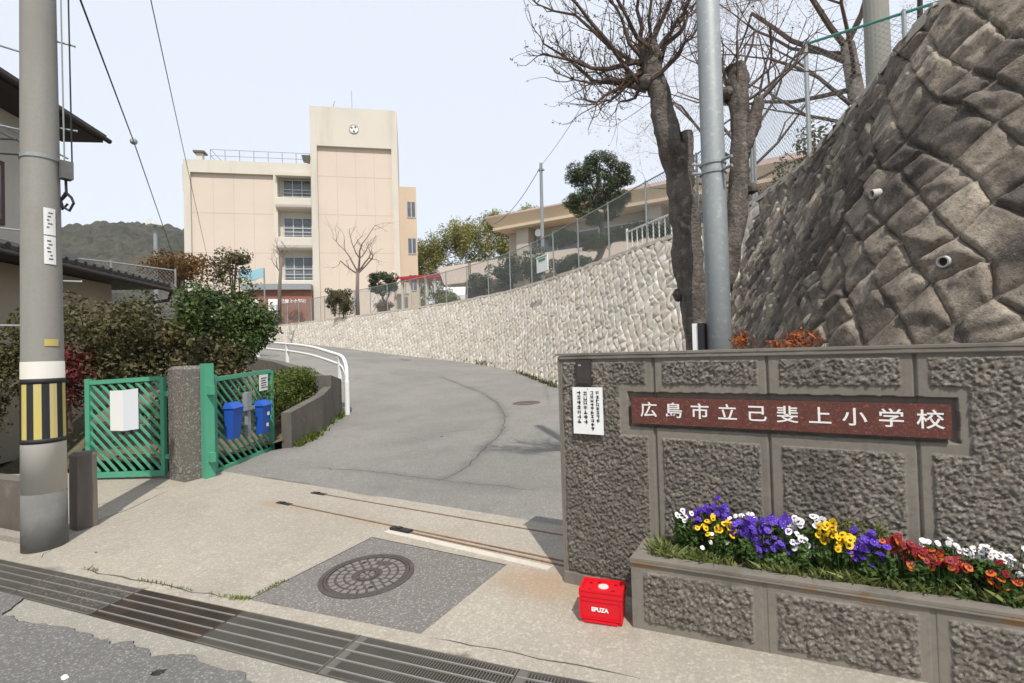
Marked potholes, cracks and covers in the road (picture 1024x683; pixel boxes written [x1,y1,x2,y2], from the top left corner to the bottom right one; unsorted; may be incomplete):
crack [85,569,229,598]
crack [427,637,637,678]
manhole cover [317,554,415,599]
crack [329,378,554,490]
